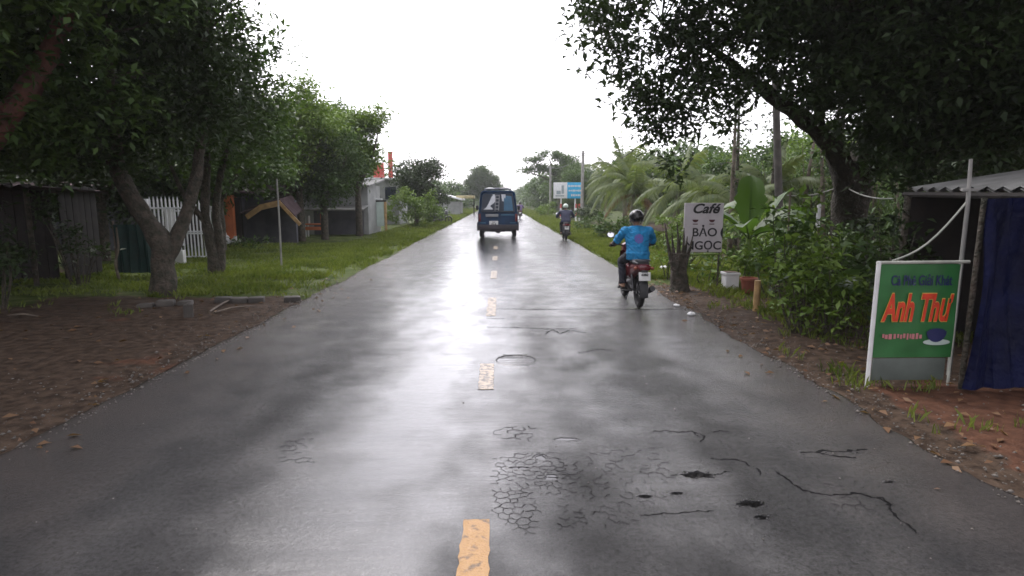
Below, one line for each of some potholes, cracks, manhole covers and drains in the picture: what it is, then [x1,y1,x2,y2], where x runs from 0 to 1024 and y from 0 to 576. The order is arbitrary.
pothole [750,514,773,522]
crack [653,430,916,533]
crack [492,308,659,353]
pothole [677,469,718,480]
pothole [733,499,768,510]
crack [490,425,714,534]
pothole [634,493,655,501]
